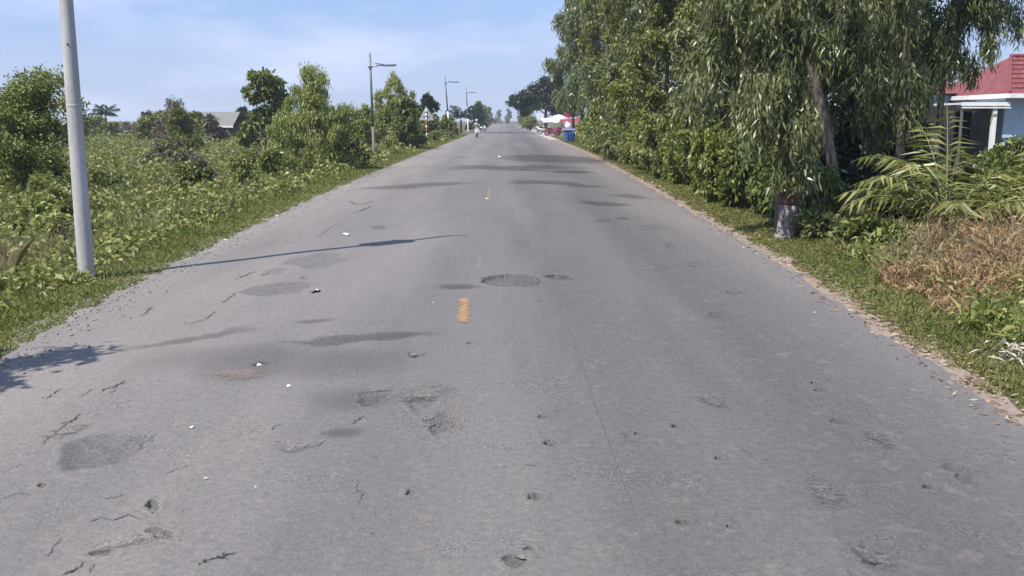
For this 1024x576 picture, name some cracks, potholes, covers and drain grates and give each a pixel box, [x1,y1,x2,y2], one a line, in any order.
pothole [537,273,579,281]
pothole [474,272,550,288]
pothole [519,489,553,505]
pothole [492,549,539,574]
pothole [415,409,465,440]
pothole [349,389,394,410]
pothole [135,495,168,518]
crack [199,551,236,566]
pothole [839,529,903,575]
crack [41,413,81,443]
pothole [395,386,448,420]
